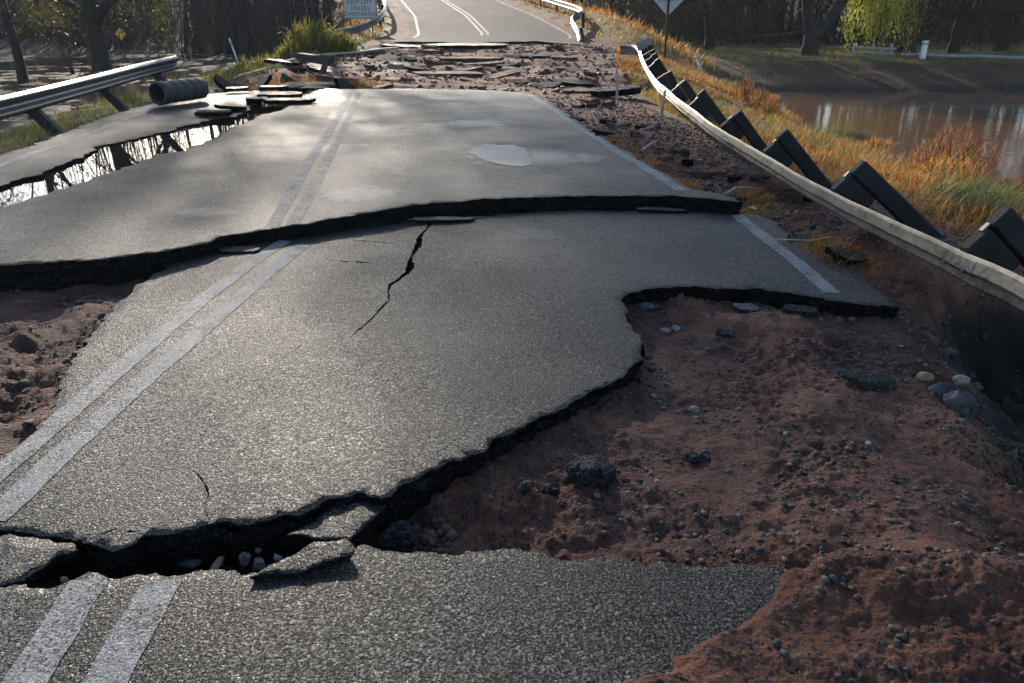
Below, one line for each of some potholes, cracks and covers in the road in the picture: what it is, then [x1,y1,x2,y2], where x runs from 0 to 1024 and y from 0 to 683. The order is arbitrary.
pothole [374,275,998,560]
crack [0,198,741,338]
crack [55,467,391,579]
